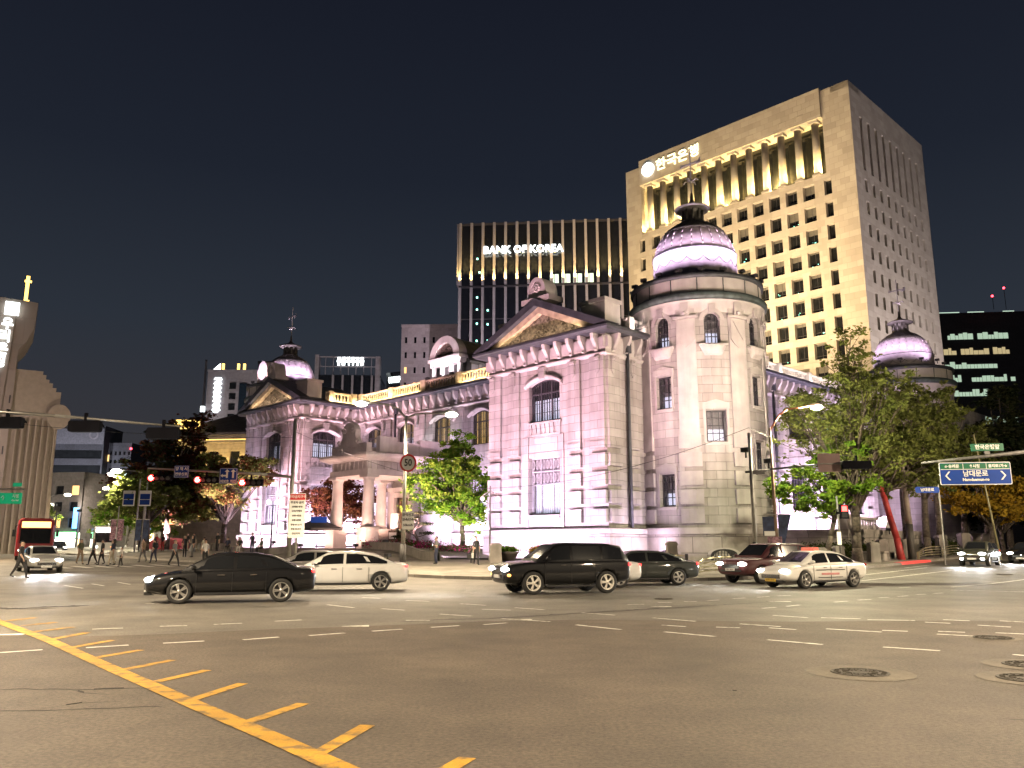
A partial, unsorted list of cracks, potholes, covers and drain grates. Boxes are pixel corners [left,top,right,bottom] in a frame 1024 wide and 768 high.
manhole cover [981,659,1024,670]
manhole cover [975,671,1024,685]
crack [1,687,180,711]
manhole cover [805,665,918,681]
